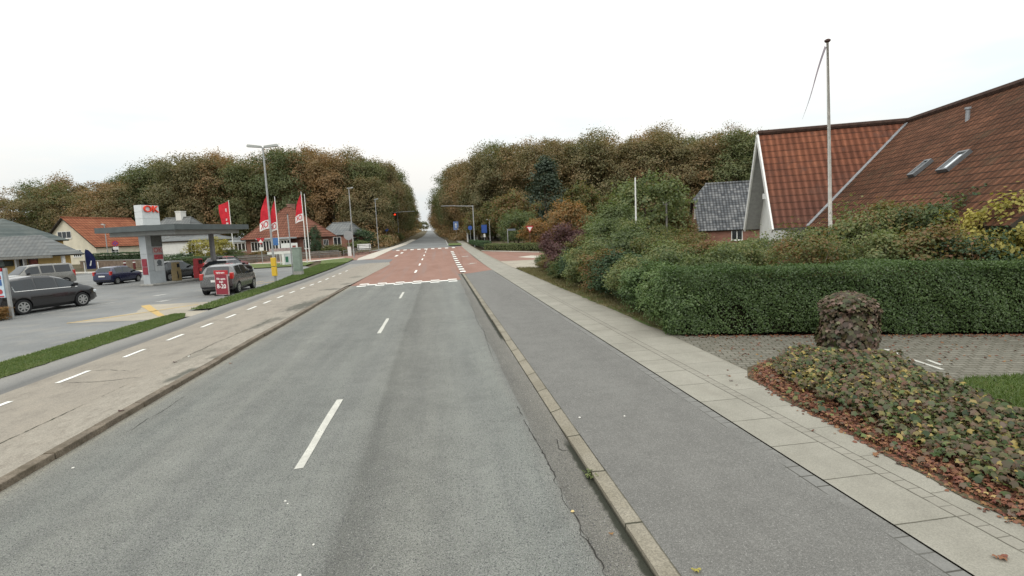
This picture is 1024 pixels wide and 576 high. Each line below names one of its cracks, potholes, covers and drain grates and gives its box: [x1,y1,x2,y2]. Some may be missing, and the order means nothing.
crack [517,406,606,576]
